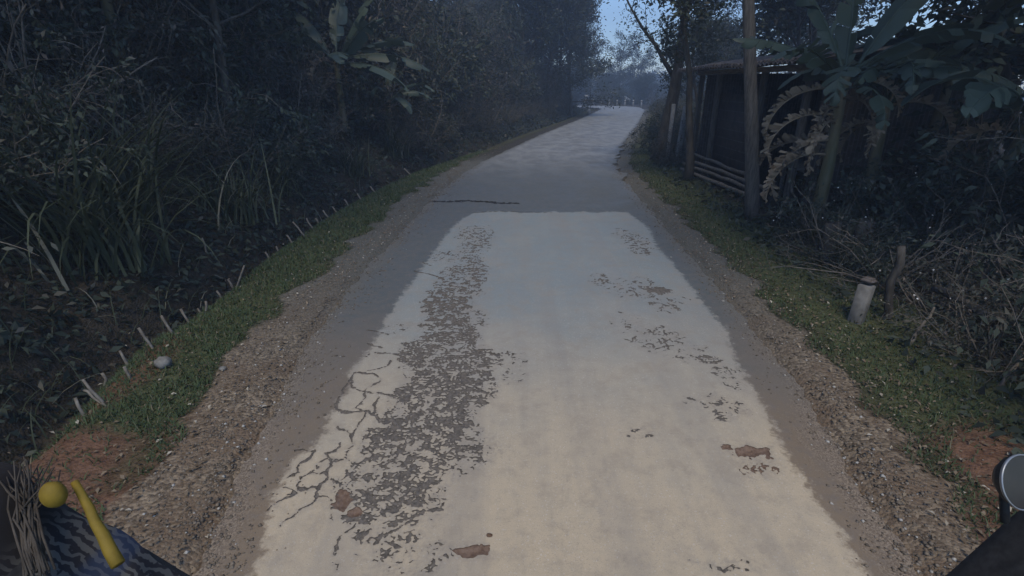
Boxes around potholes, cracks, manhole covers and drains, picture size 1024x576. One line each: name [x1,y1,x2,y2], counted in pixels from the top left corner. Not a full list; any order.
pothole [330,489,363,518]
pothole [452,533,493,558]
crack [267,226,527,574]
pothole [721,444,780,475]
